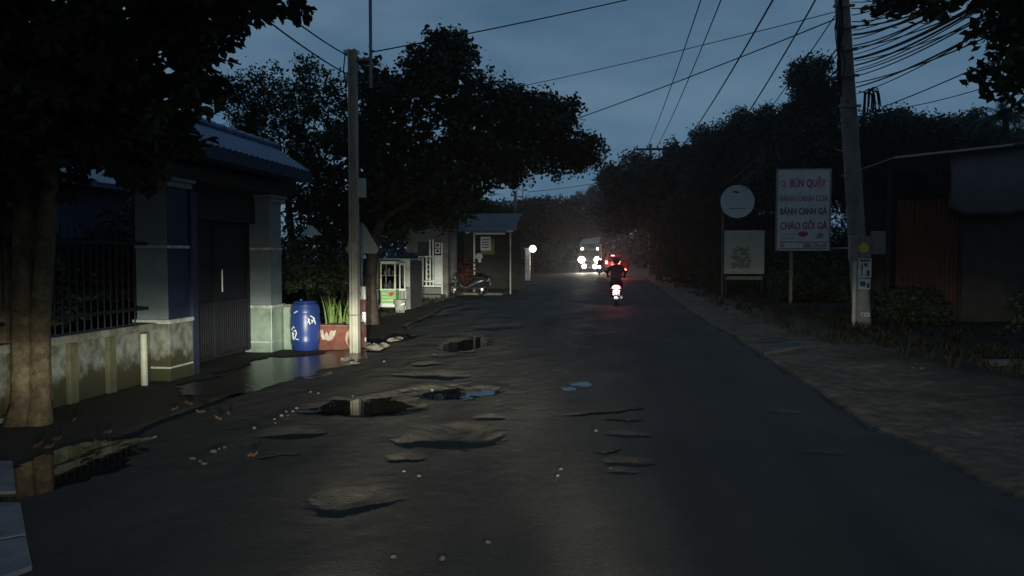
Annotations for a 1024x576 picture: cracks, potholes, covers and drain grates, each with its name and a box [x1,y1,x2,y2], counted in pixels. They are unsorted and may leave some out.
pothole [600,455,662,468]
pothole [605,429,659,438]
pothole [296,476,415,518]
pothole [385,449,432,463]
pothole [472,412,510,421]
pothole [388,369,477,381]
pothole [389,420,516,452]
pothole [607,466,642,475]
pothole [427,330,506,358]
pothole [290,382,507,420]
